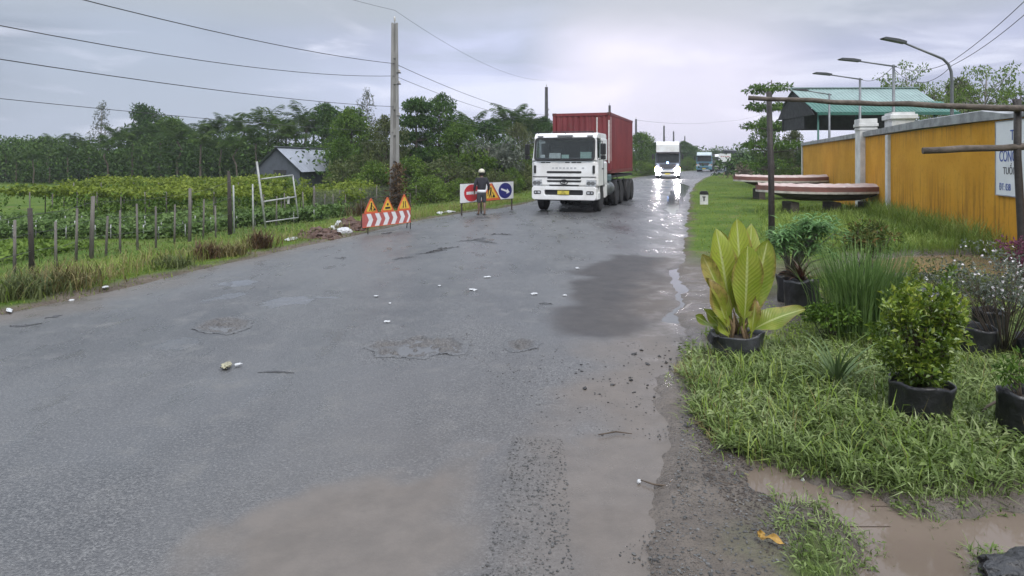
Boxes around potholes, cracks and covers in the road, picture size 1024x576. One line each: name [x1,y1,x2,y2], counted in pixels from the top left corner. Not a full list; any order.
crack [9,315,60,327]
pothole [503,337,543,352]
pothole [362,334,472,359]
crack [393,217,511,260]
pothole [191,316,254,335]
